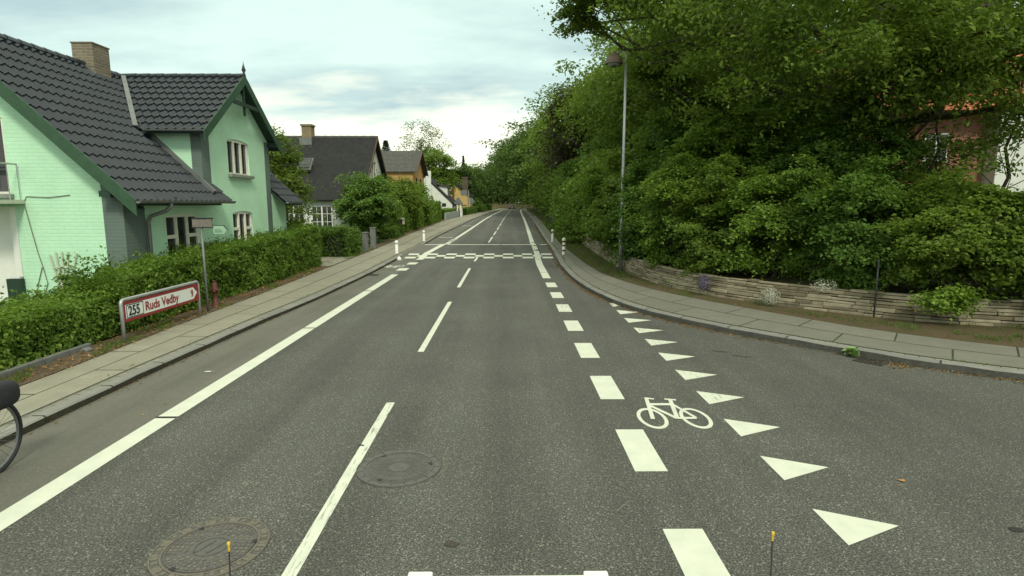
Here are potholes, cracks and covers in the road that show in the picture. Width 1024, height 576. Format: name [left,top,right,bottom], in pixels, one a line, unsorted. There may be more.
manhole cover [356,449,441,488]
drain grate [853,356,889,366]
manhole cover [147,517,270,576]
